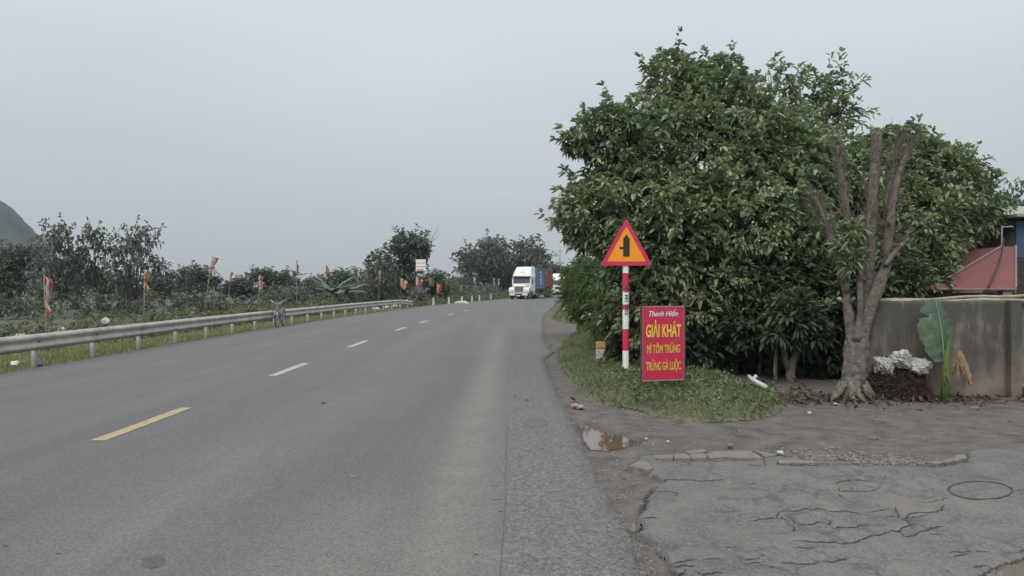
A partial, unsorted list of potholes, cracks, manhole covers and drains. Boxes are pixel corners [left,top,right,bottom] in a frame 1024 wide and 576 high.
crack [669,476,944,575]
crack [638,451,816,518]
pothole [576,421,642,451]
crack [946,550,1024,576]
manhole cover [947,481,1013,499]
